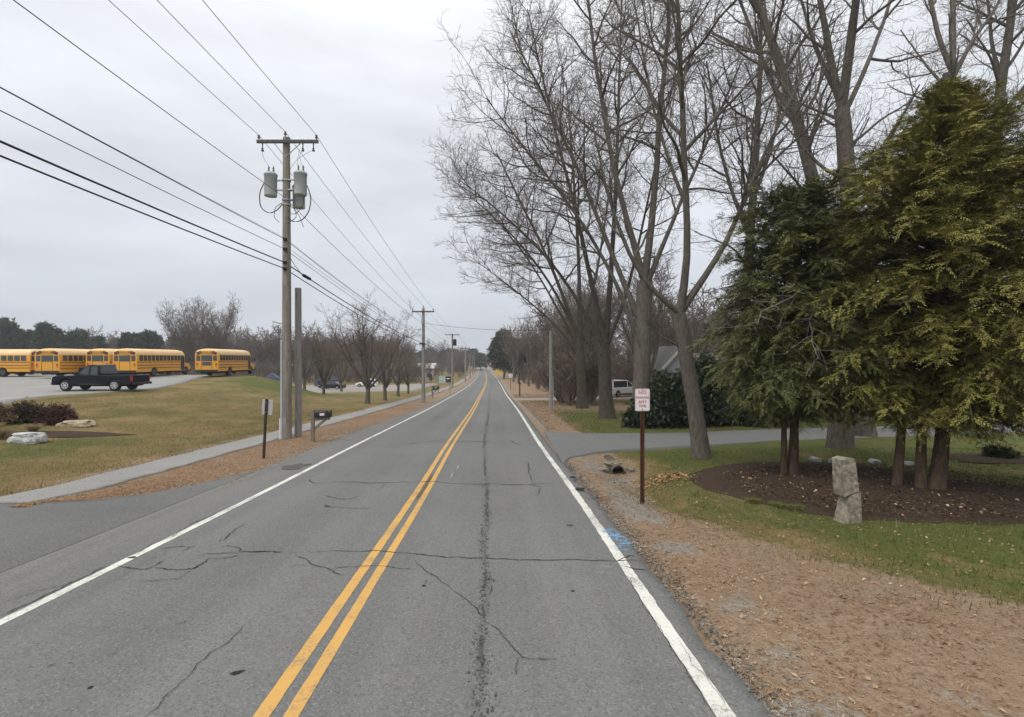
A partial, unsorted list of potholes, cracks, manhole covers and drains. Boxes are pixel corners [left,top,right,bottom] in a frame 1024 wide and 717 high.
crack [295,550,725,714]
crack [144,625,244,717]
crack [1,513,276,615]
crack [309,463,546,508]
